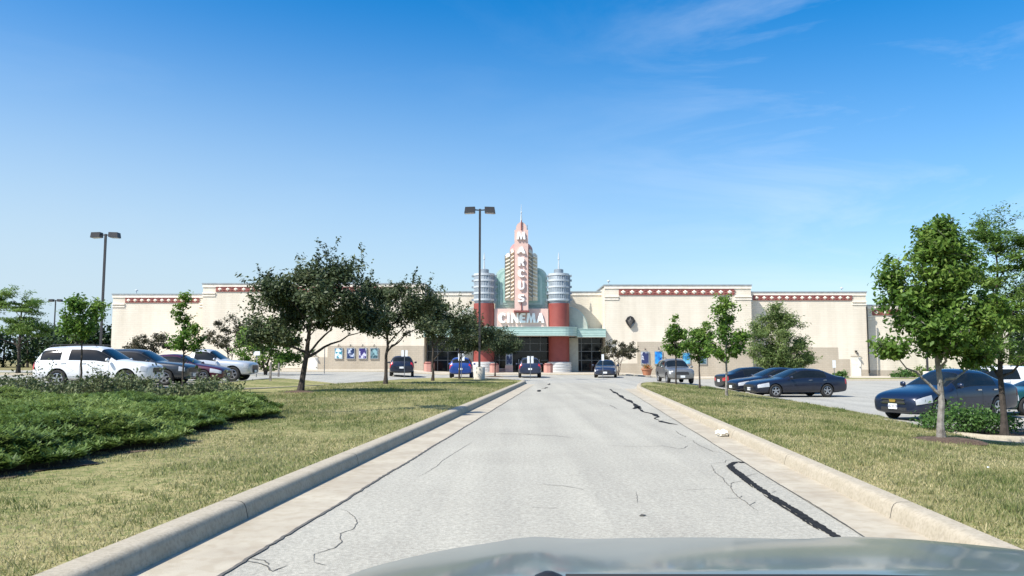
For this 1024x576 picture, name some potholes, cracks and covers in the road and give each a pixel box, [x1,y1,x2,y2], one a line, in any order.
crack [307,510,358,565]
crack [614,432,758,510]
